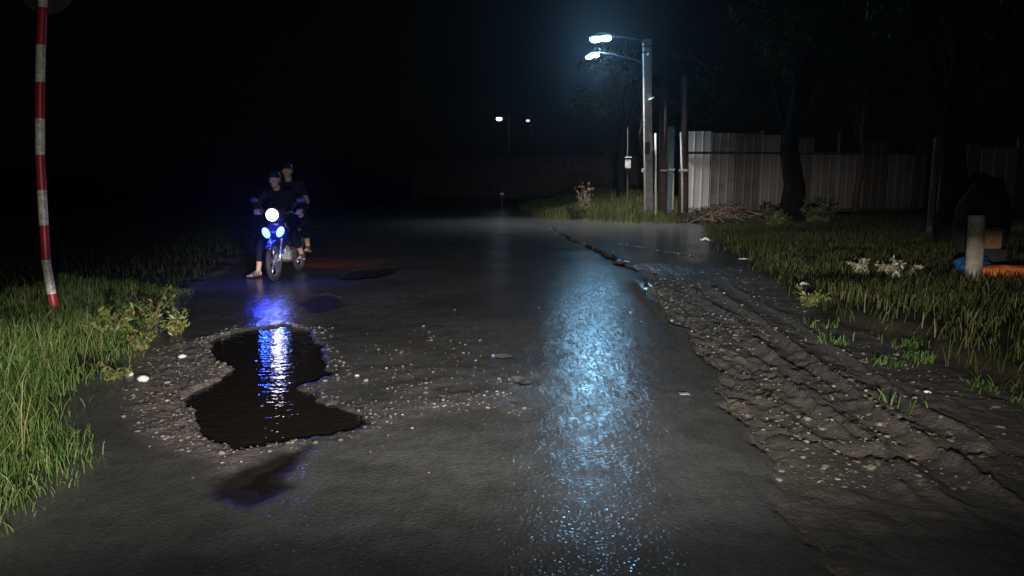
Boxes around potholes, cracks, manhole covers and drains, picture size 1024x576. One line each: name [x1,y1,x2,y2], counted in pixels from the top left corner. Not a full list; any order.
pothole [294,293,353,313]
pothole [336,266,402,280]
pothole [173,323,374,453]
pothole [205,443,317,508]
crack [544,224,699,276]
